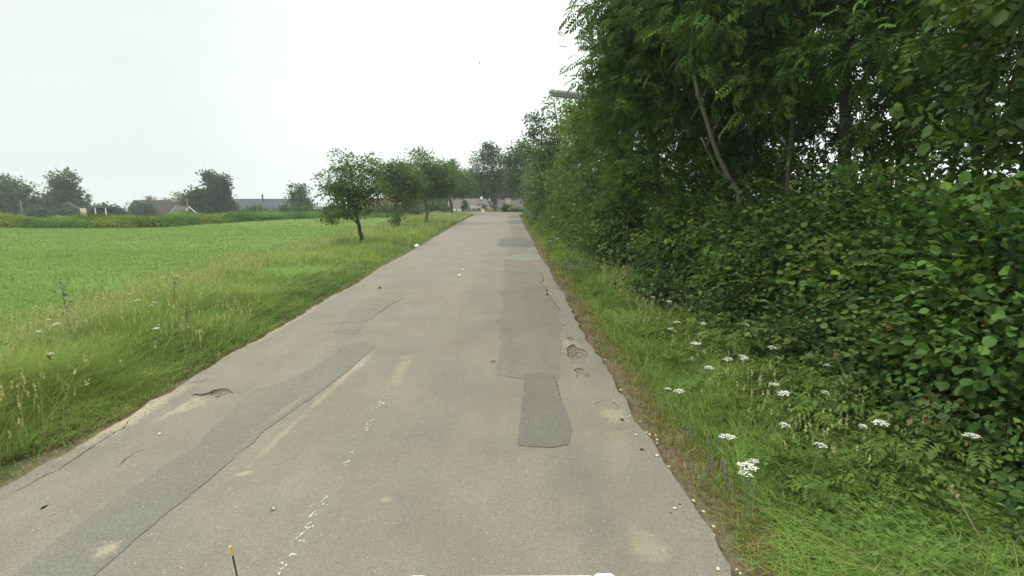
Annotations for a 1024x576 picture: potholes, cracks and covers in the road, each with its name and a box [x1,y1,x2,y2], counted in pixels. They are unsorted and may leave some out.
pothole [567,344,588,360]
pothole [191,388,232,398]
crack [3,421,144,499]
